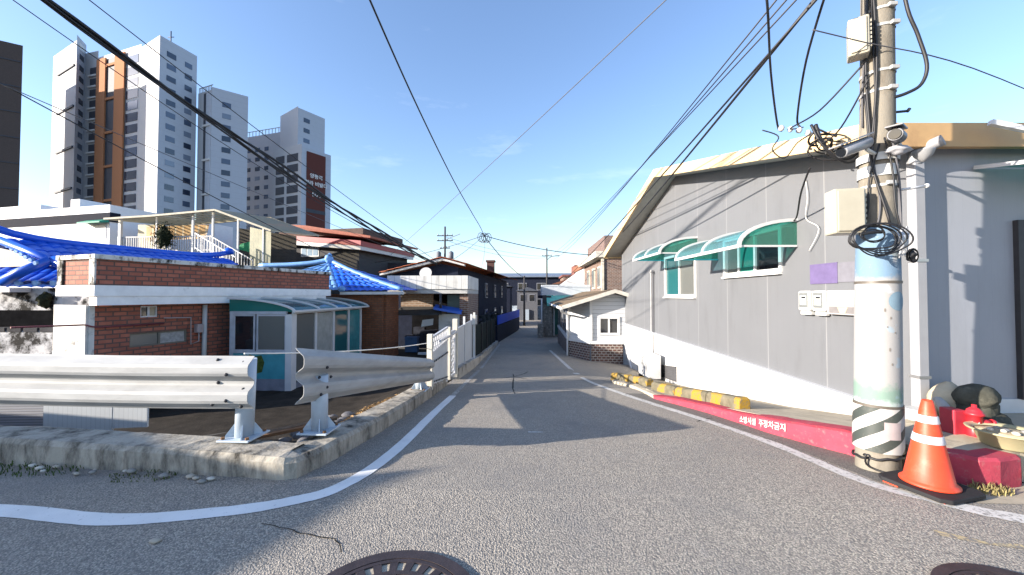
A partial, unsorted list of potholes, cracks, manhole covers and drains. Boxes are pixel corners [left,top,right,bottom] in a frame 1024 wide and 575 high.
manhole cover [327,550,470,575]
manhole cover [930,563,1024,575]
crack [261,523,342,552]
